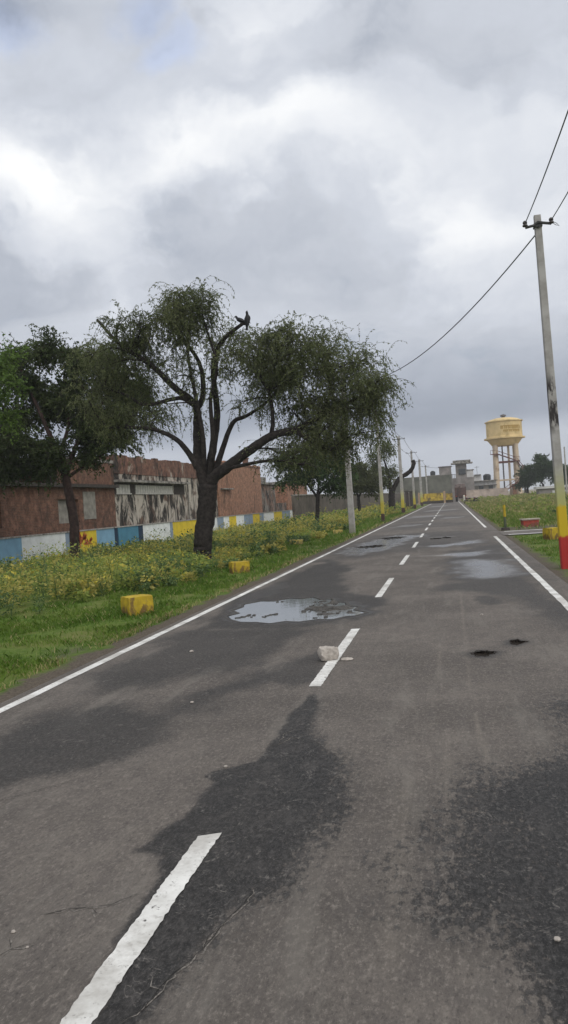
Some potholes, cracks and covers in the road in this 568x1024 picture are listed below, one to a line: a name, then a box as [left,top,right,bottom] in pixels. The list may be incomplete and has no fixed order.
pothole [224,597,369,624]
crack [41,893,140,917]
crack [0,939,34,955]
crack [115,884,257,1024]
